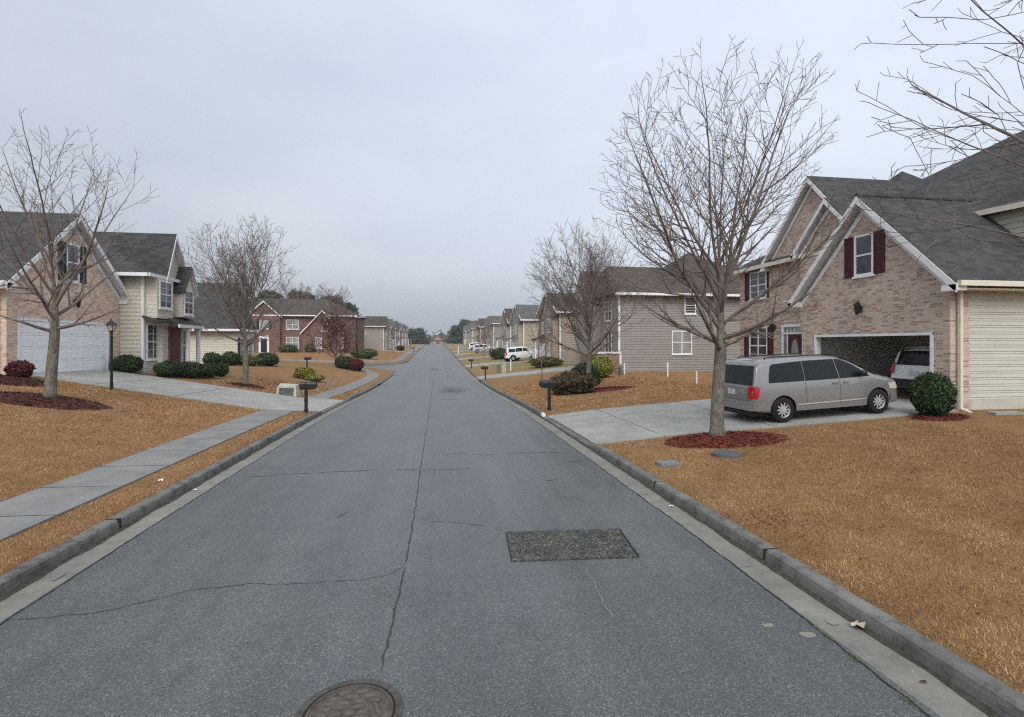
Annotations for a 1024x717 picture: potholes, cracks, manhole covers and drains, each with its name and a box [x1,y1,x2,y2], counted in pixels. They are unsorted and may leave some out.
manhole cover [295,679,403,717]
crack [8,566,406,671]
